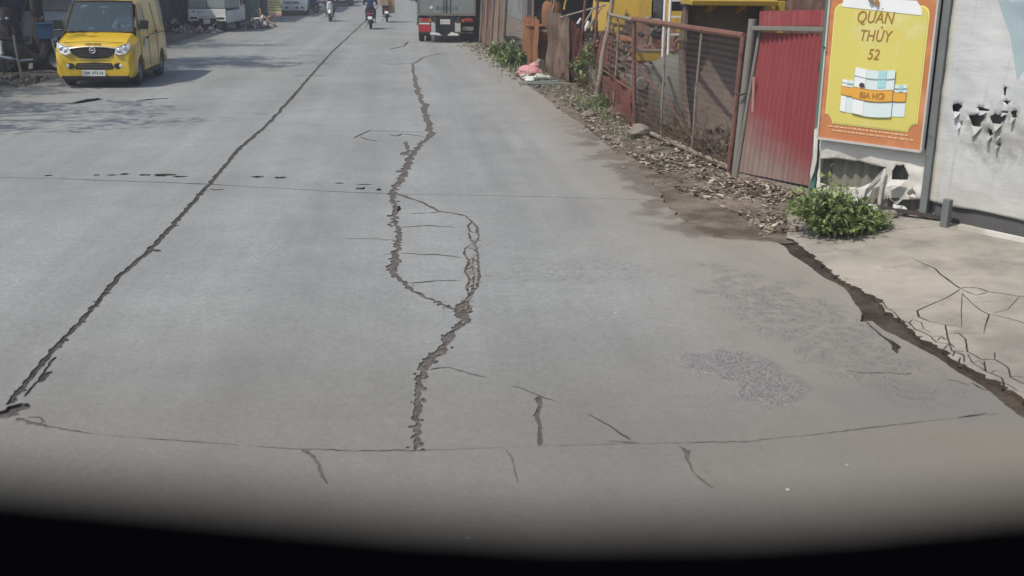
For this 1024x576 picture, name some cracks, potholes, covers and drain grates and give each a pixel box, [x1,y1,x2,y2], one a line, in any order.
crack [867,260,1024,391]
crack [349,42,487,451]
crack [302,449,328,484]
crack [506,386,555,482]
crack [679,446,714,488]
crack [589,414,643,444]
